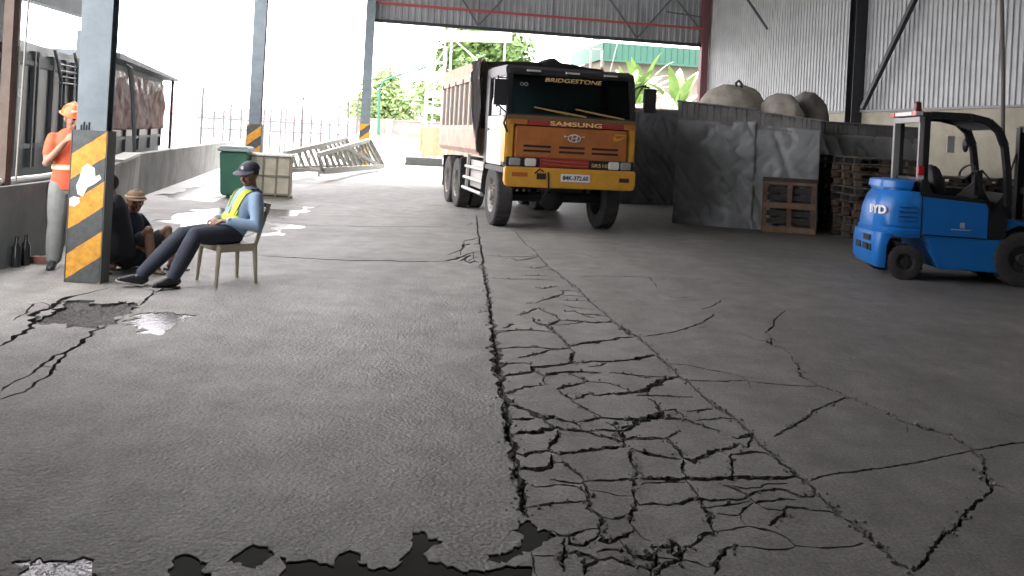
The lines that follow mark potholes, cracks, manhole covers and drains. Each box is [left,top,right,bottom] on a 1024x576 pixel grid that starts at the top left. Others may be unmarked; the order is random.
pothole [36,300,139,330]
crack [488,248,1024,576]
crack [0,288,165,399]
crack [271,223,483,263]
